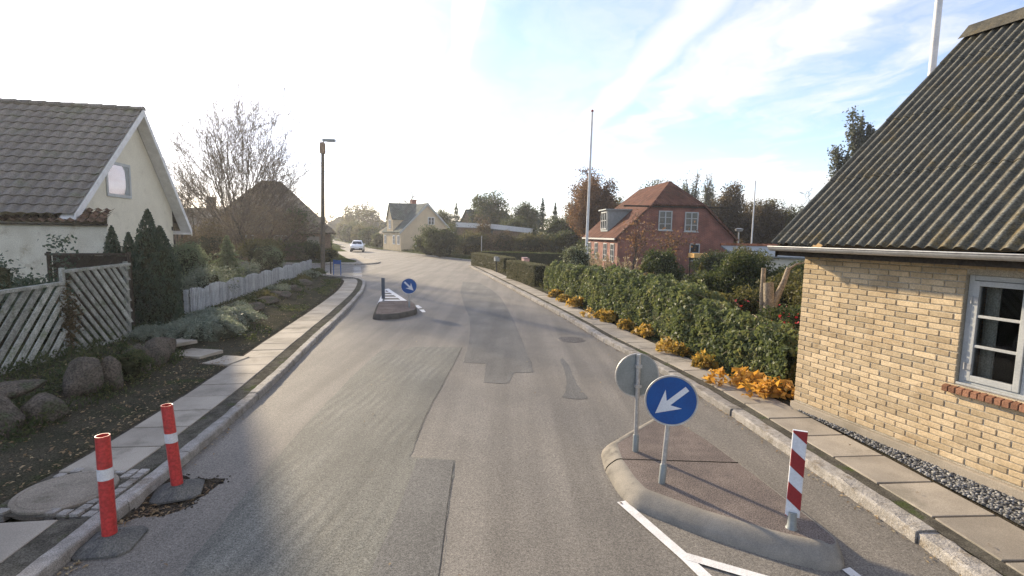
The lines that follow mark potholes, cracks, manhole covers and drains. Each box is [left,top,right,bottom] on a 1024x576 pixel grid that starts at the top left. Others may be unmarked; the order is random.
pothole [117,474,231,524]
